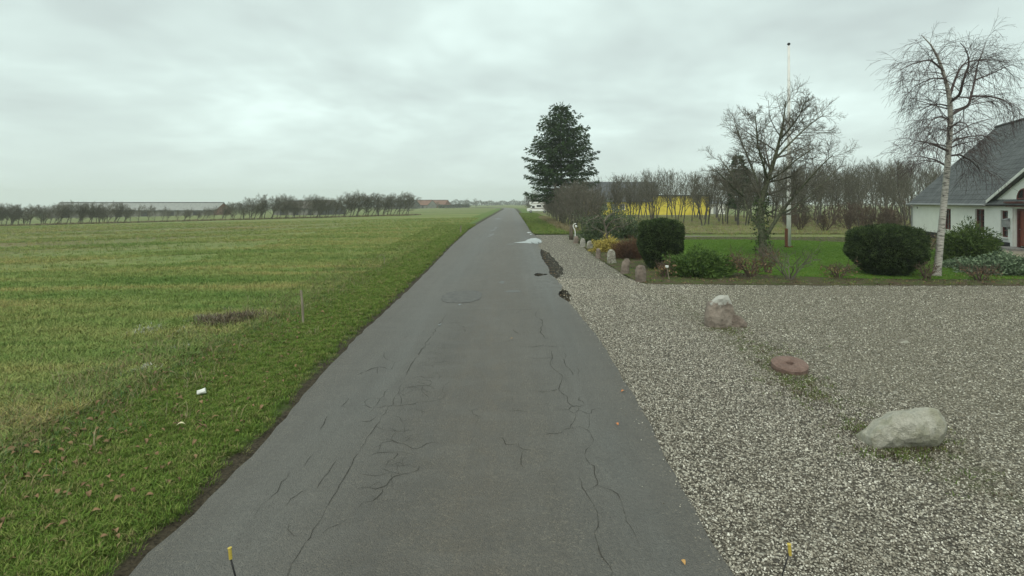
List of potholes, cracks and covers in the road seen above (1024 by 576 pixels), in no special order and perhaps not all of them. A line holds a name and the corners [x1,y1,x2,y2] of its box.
crack [256,319,464,575]
pothole [540,249,563,278]
crack [481,309,638,575]
